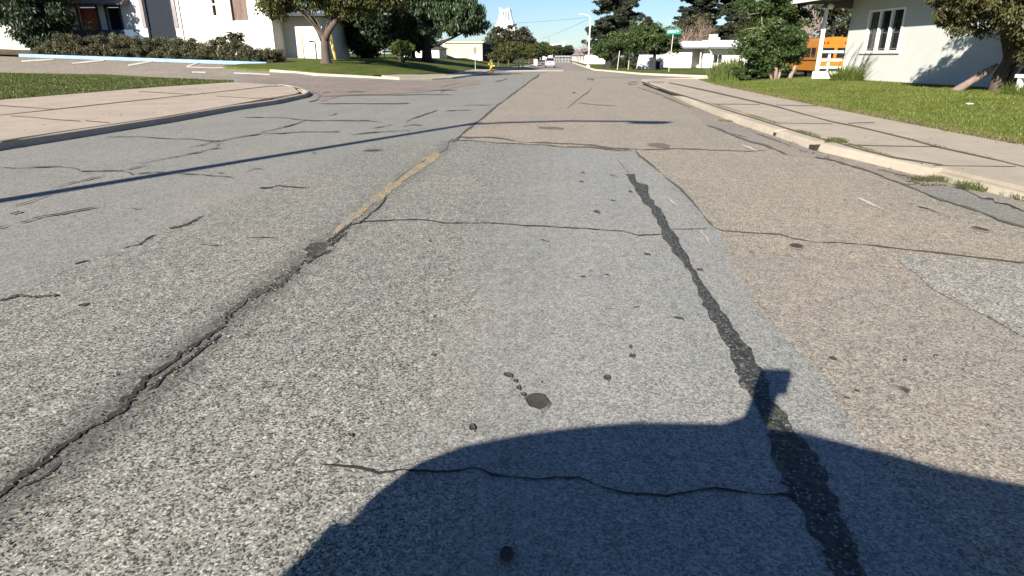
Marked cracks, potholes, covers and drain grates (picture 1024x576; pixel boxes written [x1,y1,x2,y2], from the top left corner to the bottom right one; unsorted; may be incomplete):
pothole [498,546,516,566]
crack [0,139,659,501]
crack [0,83,457,228]
crack [321,464,798,502]
crack [640,125,1024,227]
pothole [522,393,552,413]
